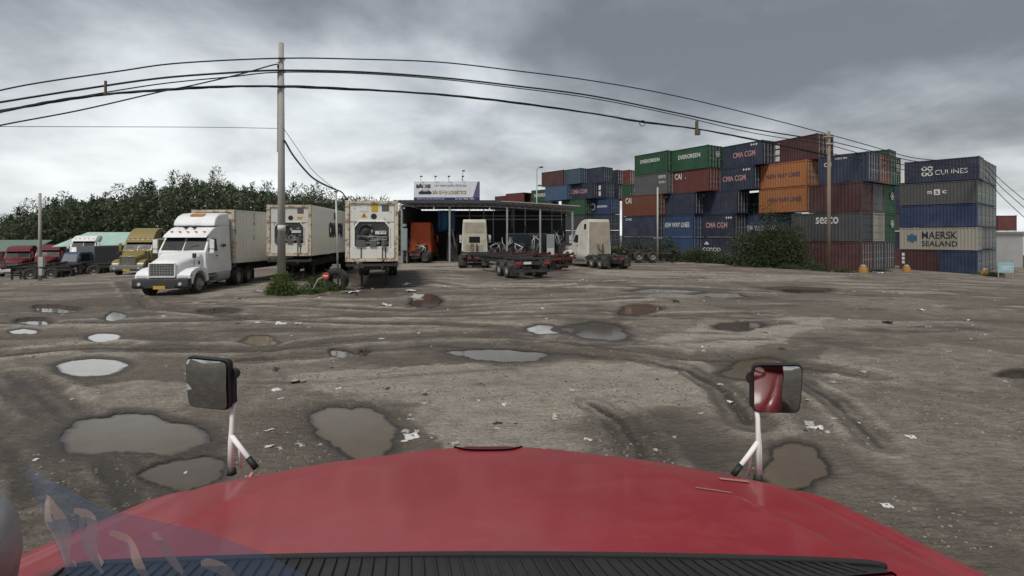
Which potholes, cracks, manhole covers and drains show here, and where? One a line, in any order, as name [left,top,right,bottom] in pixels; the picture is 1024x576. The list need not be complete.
pothole [434,348,562,364]
pothole [708,355,810,381]
pothole [81,331,128,342]
pothole [550,320,636,343]
pothole [989,367,1024,379]
pothole [126,452,236,495]
pothole [5,316,61,326]
pothole [233,334,285,348]
pothole [519,323,583,336]
pothole [25,303,92,314]
pothole [324,346,364,358]
pothole [707,321,772,333]
